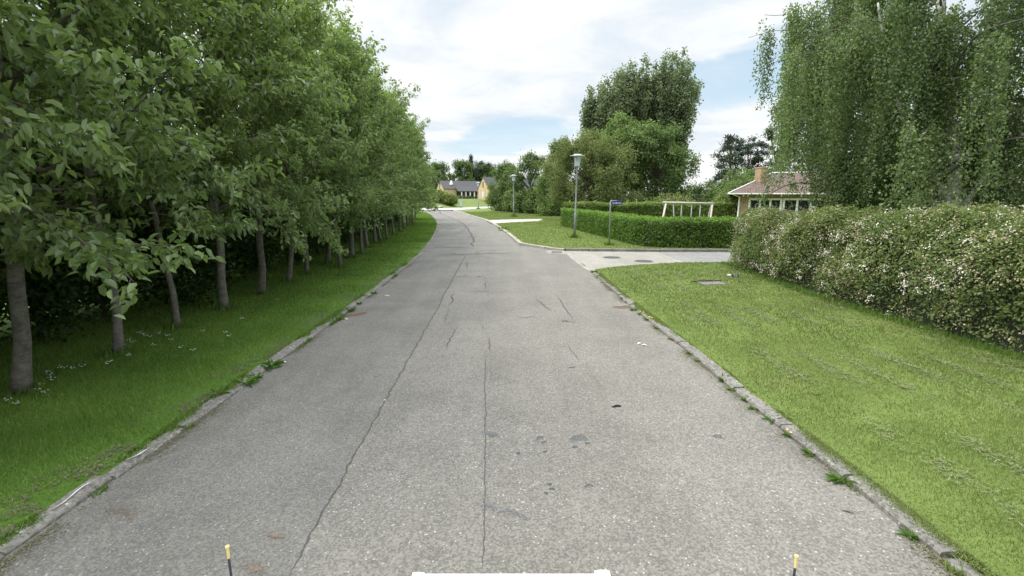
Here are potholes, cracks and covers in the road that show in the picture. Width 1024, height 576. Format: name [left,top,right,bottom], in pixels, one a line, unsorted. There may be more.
crack [289,251,513,575]
crack [519,296,577,323]
